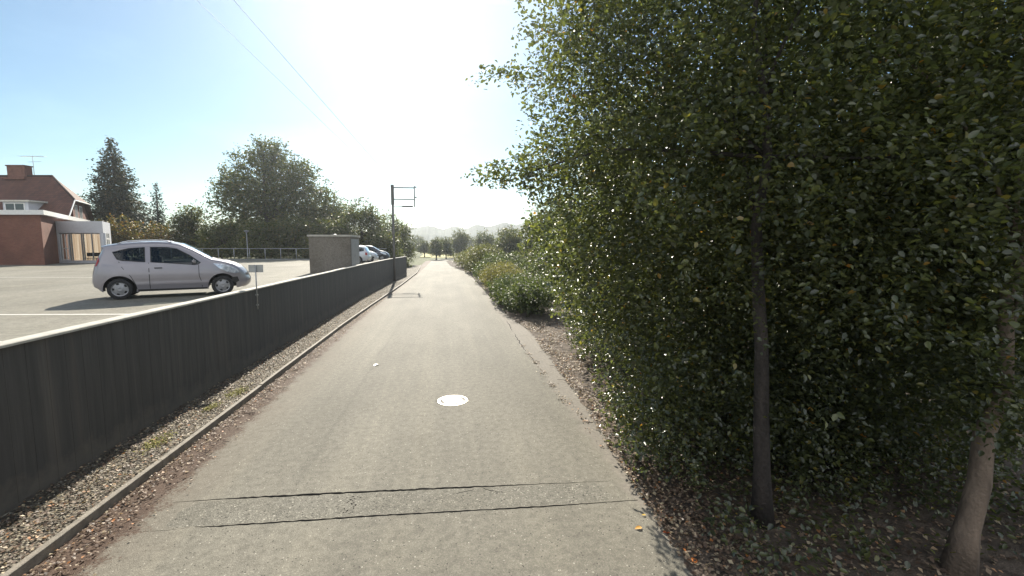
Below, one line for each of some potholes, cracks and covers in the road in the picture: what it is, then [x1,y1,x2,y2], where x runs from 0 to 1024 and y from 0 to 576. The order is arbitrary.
manhole cover [437,395,469,406]
